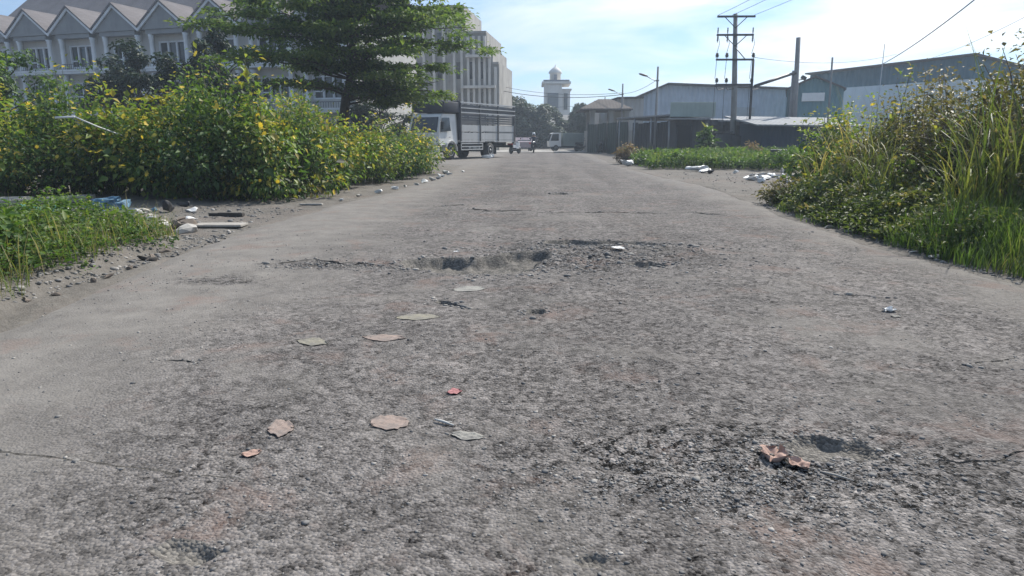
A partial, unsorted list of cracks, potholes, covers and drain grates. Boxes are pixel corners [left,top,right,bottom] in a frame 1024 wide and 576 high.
crack [0,450,260,482]
pothole [399,250,552,275]
pothole [784,435,882,462]
crack [901,451,1024,464]
